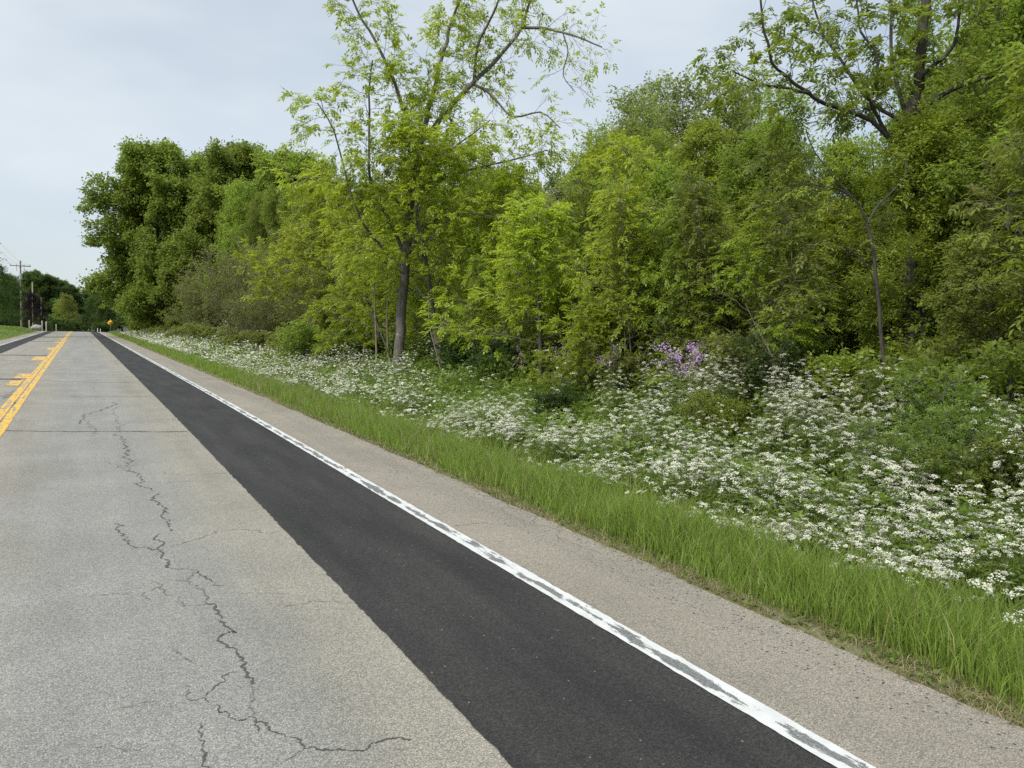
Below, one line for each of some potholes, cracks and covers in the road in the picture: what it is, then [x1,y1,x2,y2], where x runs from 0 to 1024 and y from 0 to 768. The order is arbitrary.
crack [79,402,411,768]
